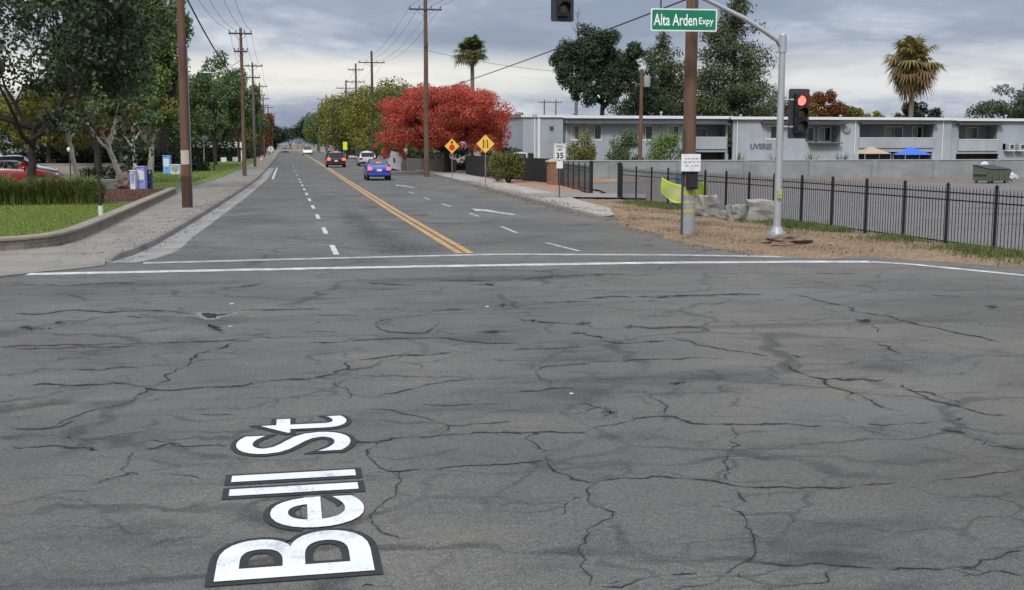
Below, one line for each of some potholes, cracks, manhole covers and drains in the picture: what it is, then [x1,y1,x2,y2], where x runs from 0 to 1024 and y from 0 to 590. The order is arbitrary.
pothole [194,311,242,320]
crack [523,293,758,304]
pothole [206,323,225,334]
crack [4,309,1022,590]
